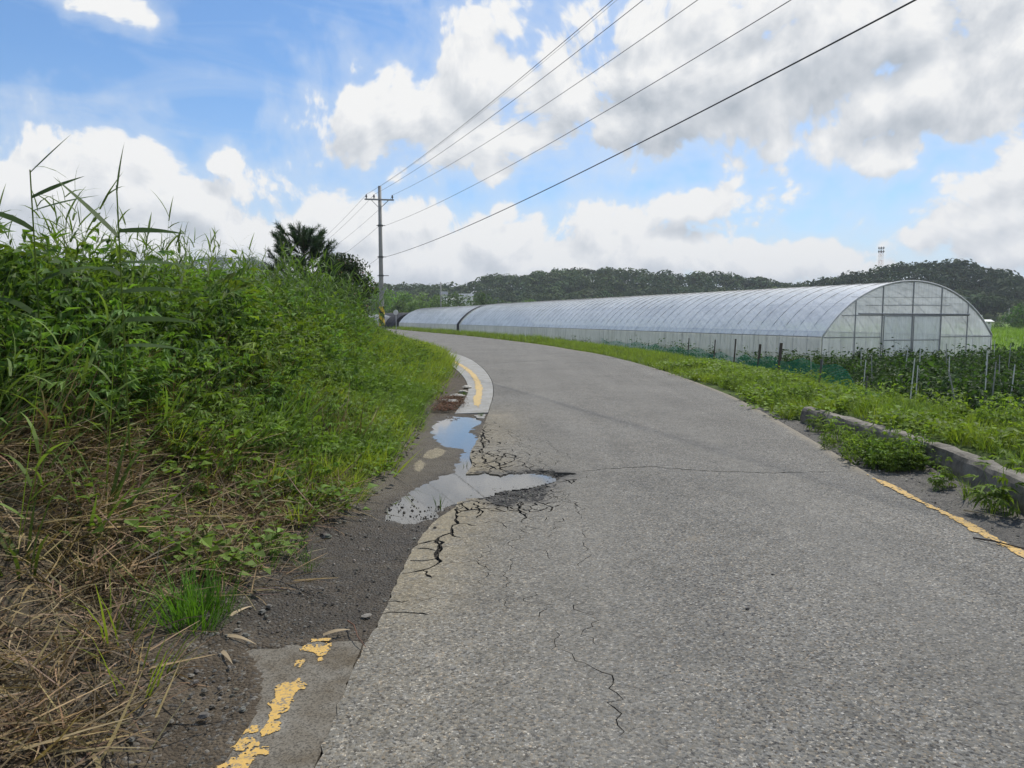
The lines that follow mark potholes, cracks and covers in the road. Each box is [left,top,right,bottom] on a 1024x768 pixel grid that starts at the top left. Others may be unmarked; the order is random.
crack [471,421,569,474]
pothole [445,468,571,507]
crack [475,545,625,736]
crack [402,466,834,578]
